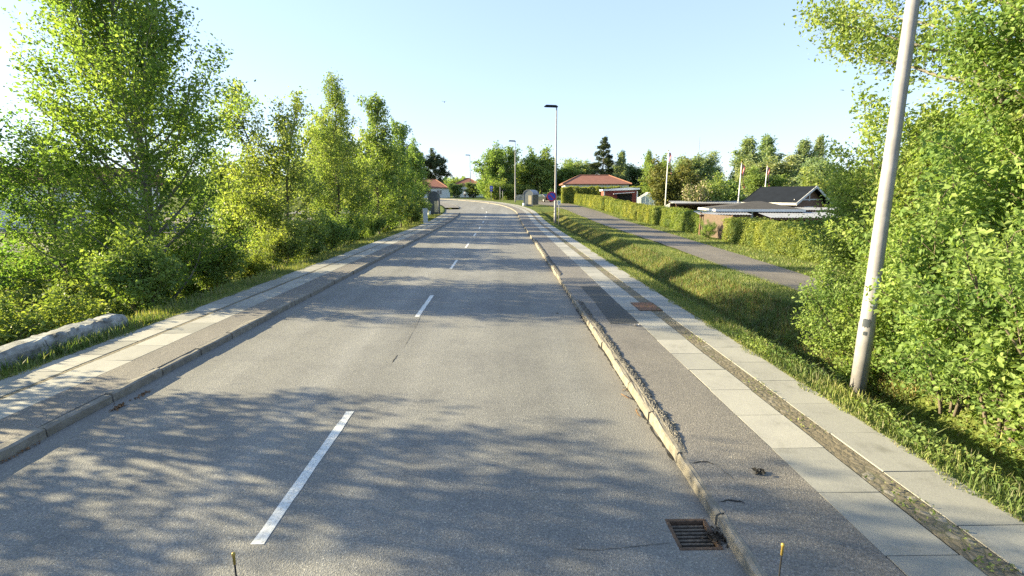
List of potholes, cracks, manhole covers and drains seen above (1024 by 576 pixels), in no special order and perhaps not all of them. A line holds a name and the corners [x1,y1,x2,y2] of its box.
crack [574,542,671,550]
drain grate [665,519,724,551]
manhole cover [631,302,663,311]
